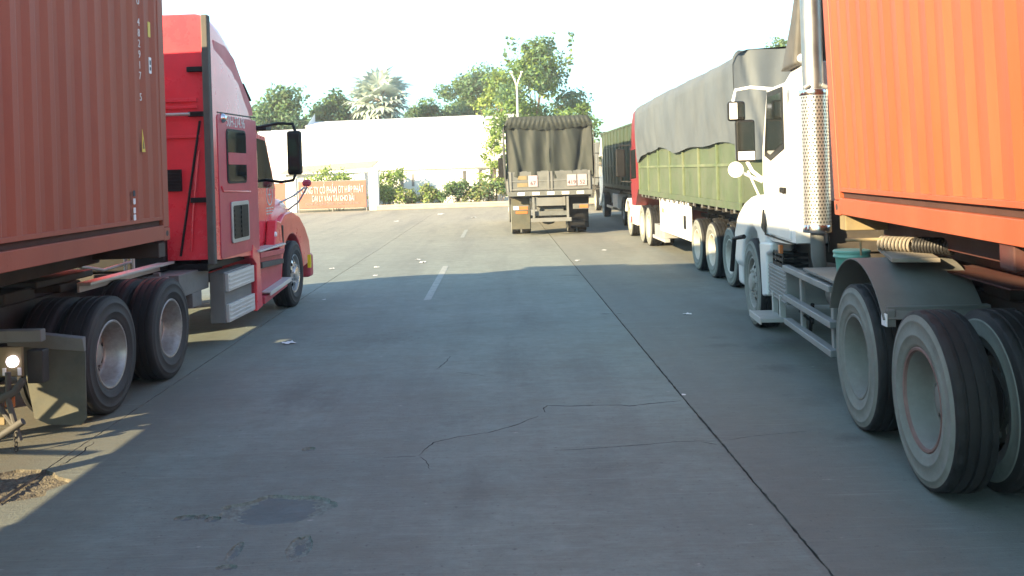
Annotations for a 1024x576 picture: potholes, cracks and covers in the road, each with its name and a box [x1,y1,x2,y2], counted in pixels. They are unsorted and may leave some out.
pothole [218,495,338,525]
pothole [225,542,244,563]
crack [383,401,674,468]
pothole [285,535,313,561]
